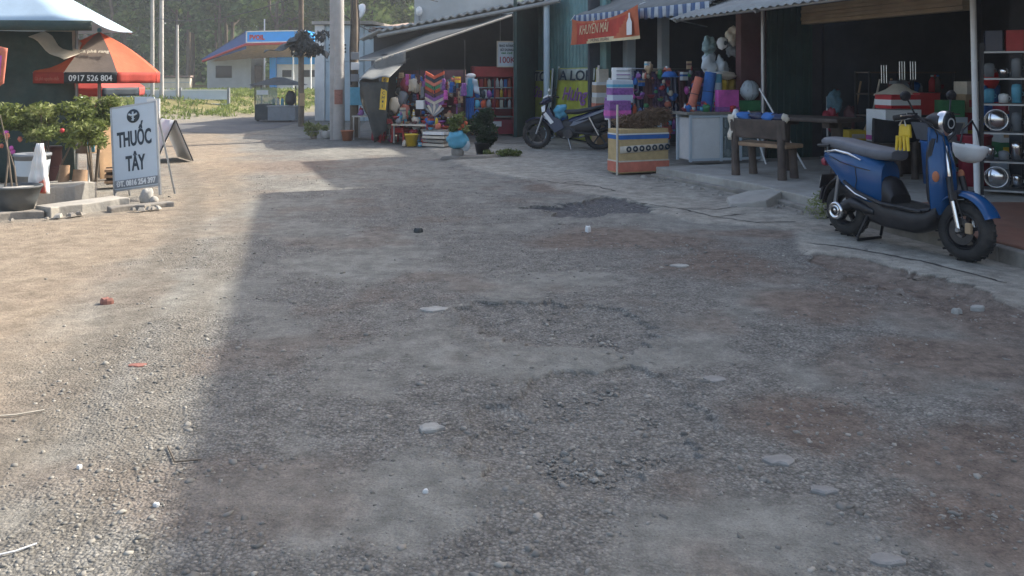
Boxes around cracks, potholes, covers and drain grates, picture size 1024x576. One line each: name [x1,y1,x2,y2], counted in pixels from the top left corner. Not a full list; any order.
crack [812,243,1007,283]
crack [639,202,795,223]
pothole [434,359,742,518]
pothole [441,297,680,361]
